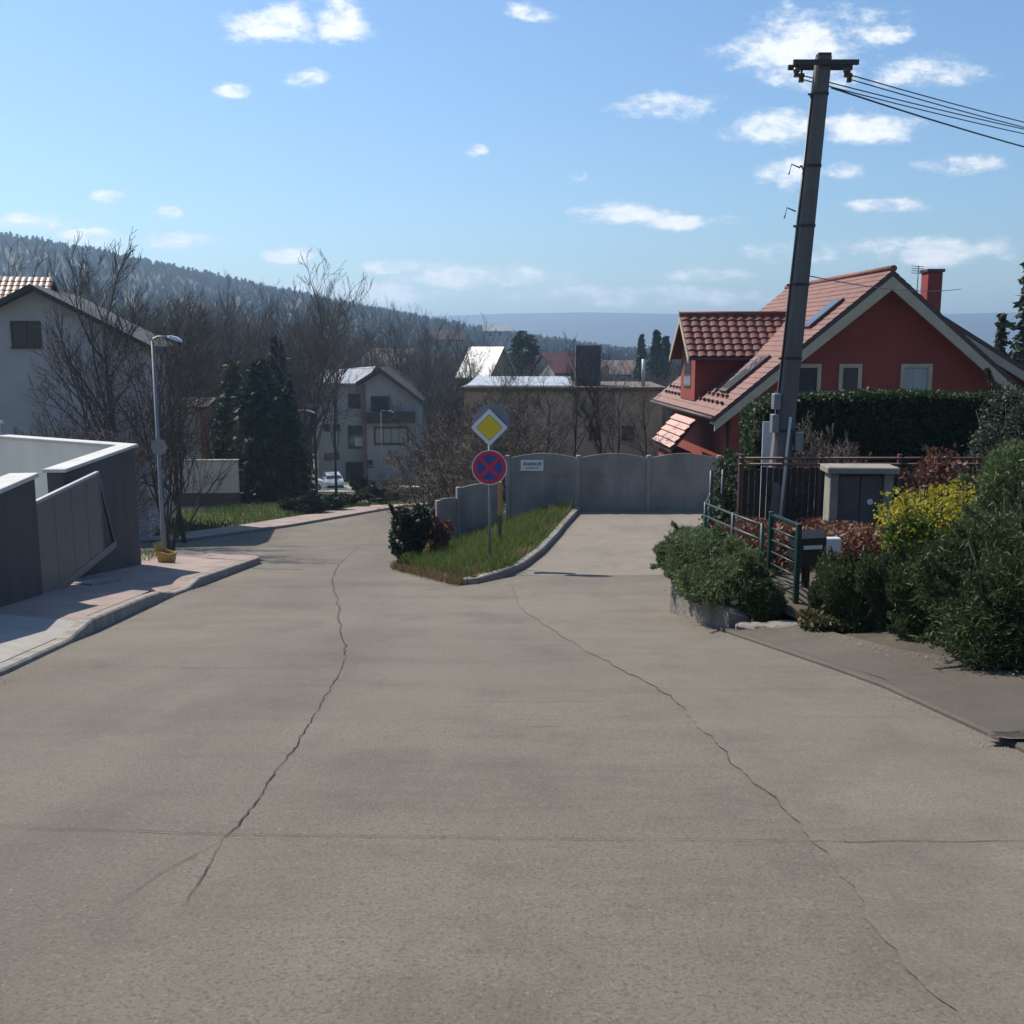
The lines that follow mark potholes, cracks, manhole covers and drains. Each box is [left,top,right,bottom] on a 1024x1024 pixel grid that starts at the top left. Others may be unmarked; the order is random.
crack [4,538,1012,909]
